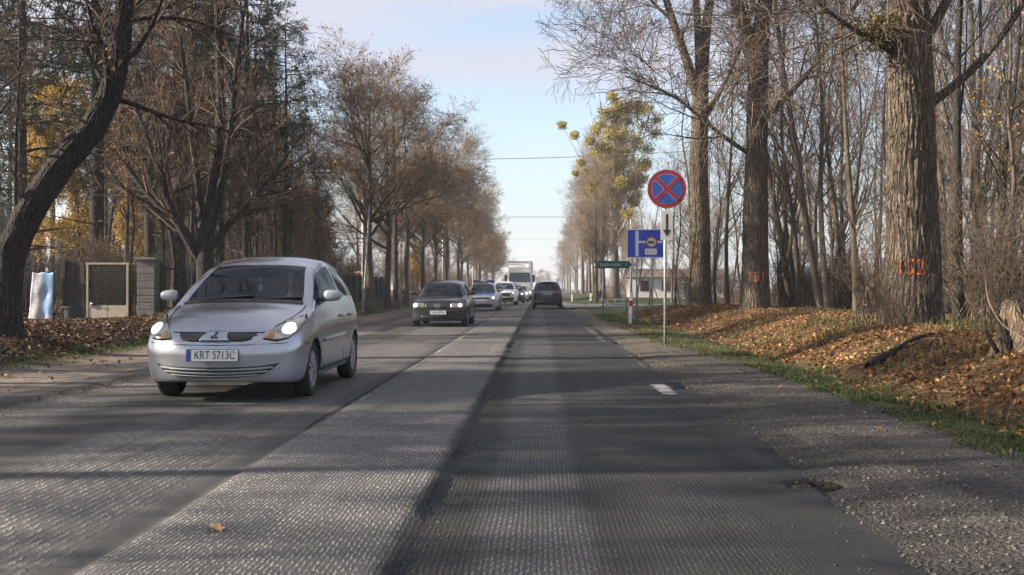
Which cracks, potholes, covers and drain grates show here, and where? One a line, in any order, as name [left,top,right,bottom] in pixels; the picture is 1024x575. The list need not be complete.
pothole [800,481,843,493]
